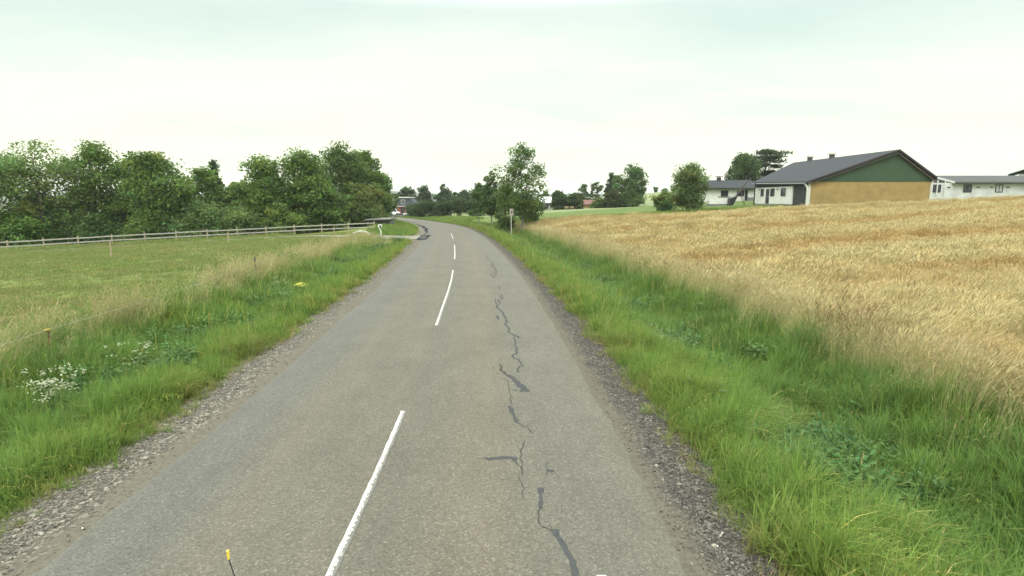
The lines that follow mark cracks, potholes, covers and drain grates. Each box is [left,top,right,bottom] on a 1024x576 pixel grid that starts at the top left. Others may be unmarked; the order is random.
crack [486,256,523,404]
